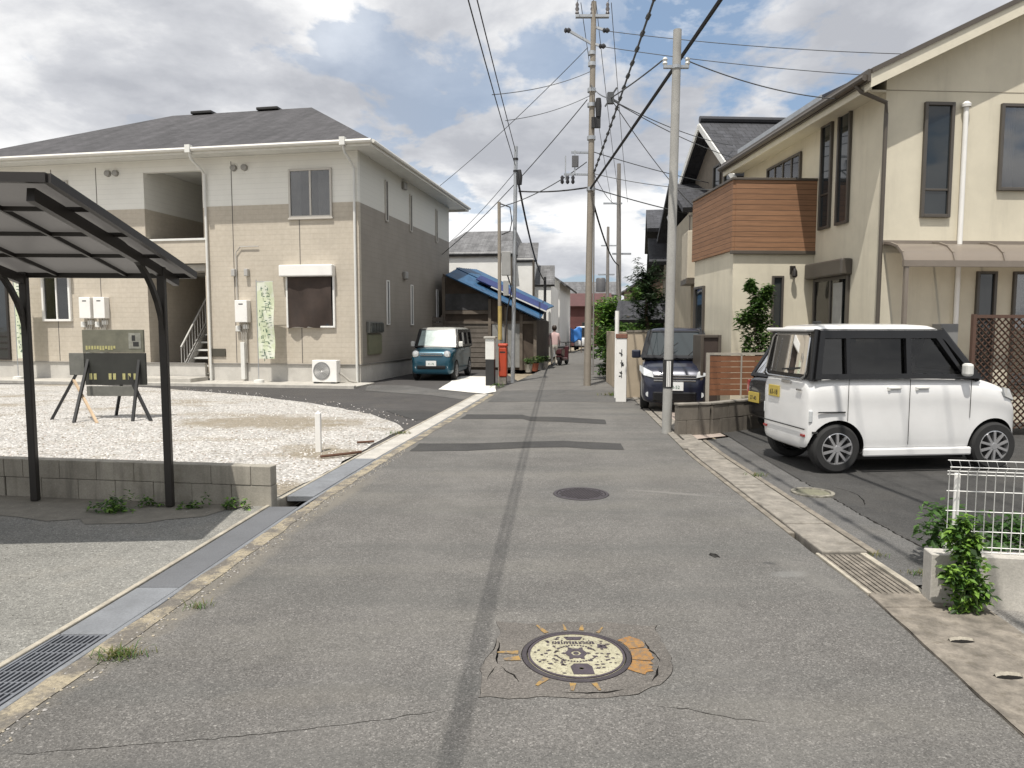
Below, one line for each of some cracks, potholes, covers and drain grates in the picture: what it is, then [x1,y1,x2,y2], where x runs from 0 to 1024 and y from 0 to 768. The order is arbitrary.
drain grate [816,553,922,596]
crack [653,705,769,723]
manhole cover [791,487,835,498]
drain grate [0,634,107,706]
manhole cover [522,631,631,693]
crack [9,710,438,755]
manhole cover [554,487,609,501]
